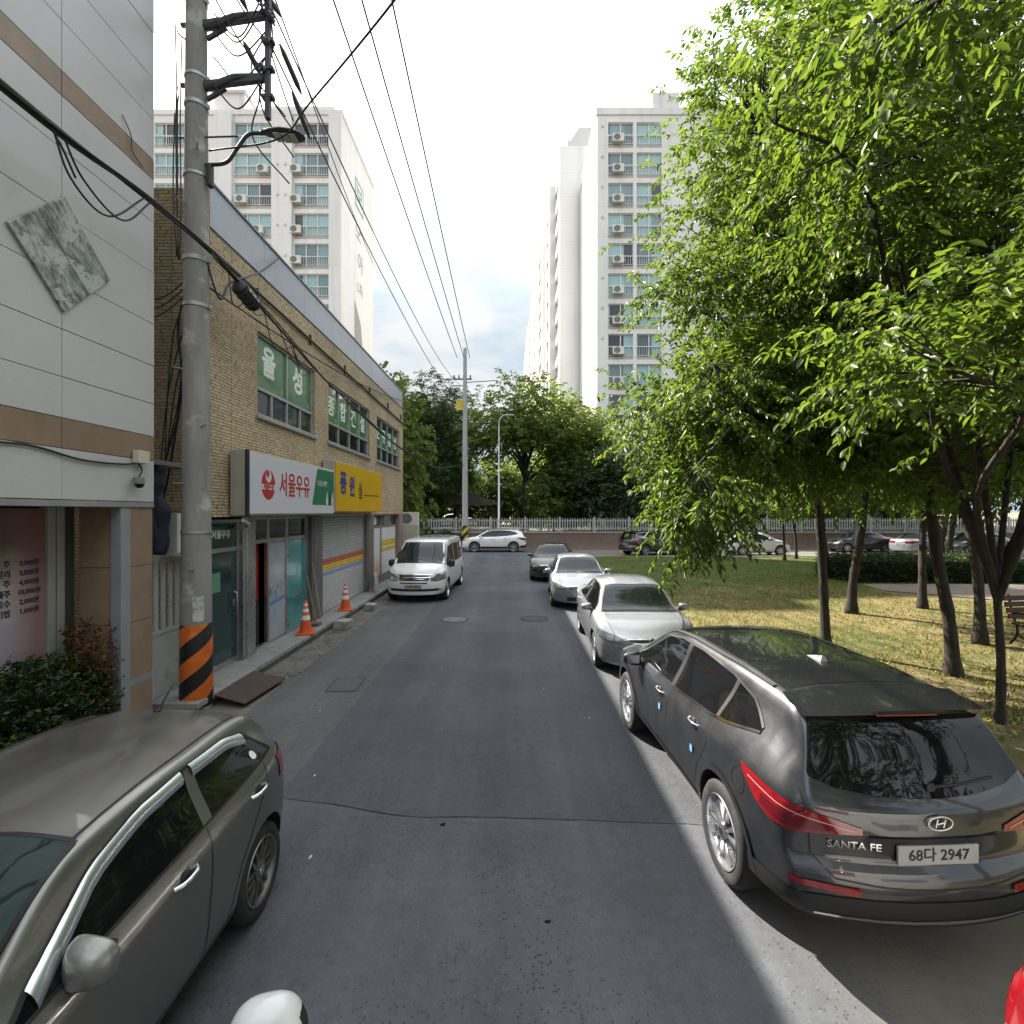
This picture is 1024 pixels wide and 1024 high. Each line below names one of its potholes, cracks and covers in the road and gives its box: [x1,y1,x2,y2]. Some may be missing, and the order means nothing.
manhole cover [325,677,366,692]
